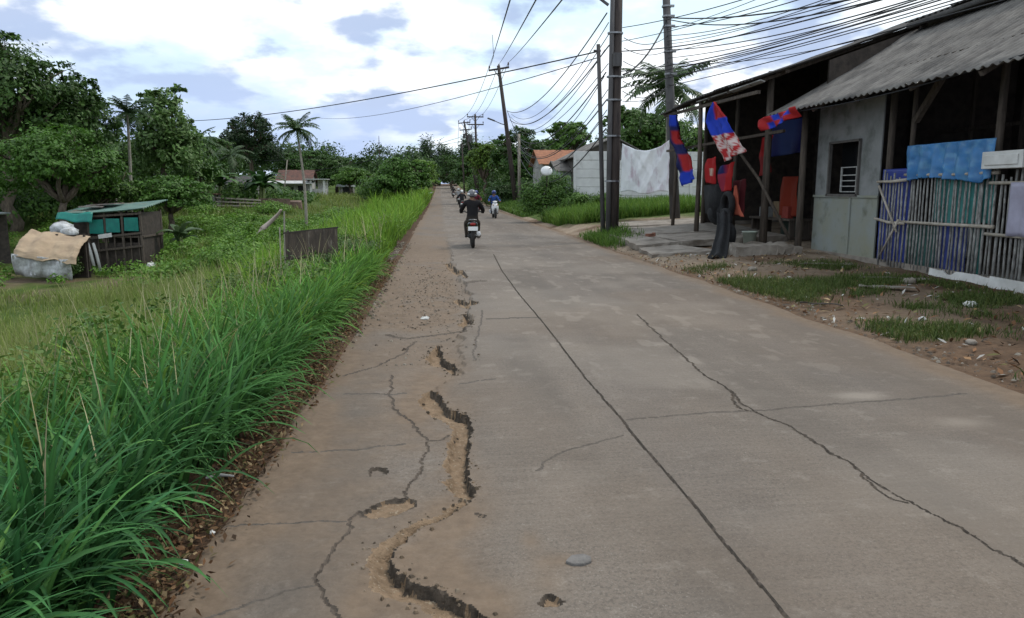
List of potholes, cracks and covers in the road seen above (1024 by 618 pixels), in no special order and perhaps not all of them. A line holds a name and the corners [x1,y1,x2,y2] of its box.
crack [535,314,1024,567]
pothole [365,500,487,618]
pothole [453,300,478,309]
pothole [418,391,477,501]
pothole [425,346,458,376]
pothole [368,467,389,477]
pothole [445,263,468,278]
pothole [537,593,566,607]
crack [205,310,540,618]
pothole [359,497,417,519]
